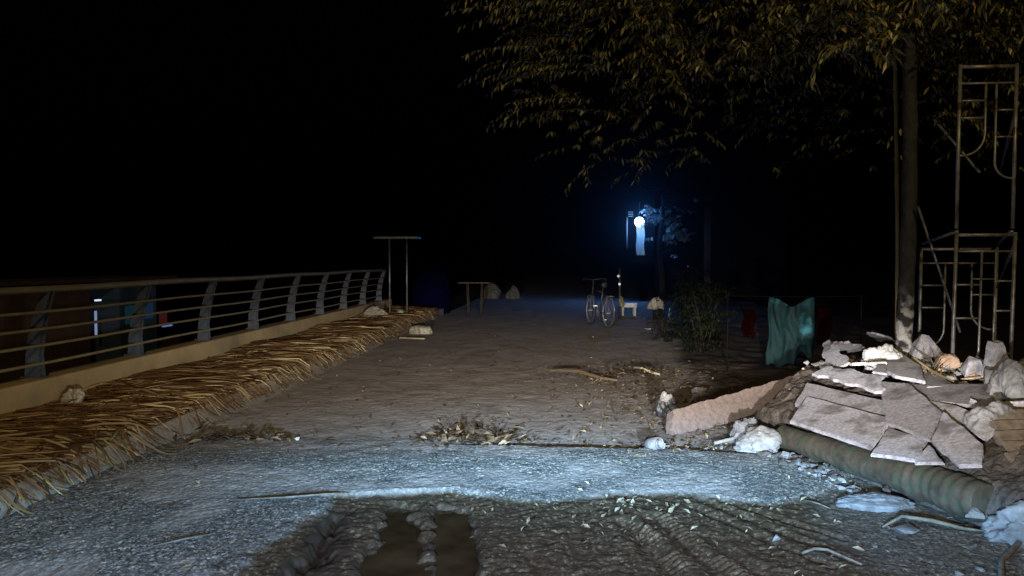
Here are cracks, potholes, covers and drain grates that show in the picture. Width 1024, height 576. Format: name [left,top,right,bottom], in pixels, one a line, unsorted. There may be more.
pothole [273,486,499,576]
